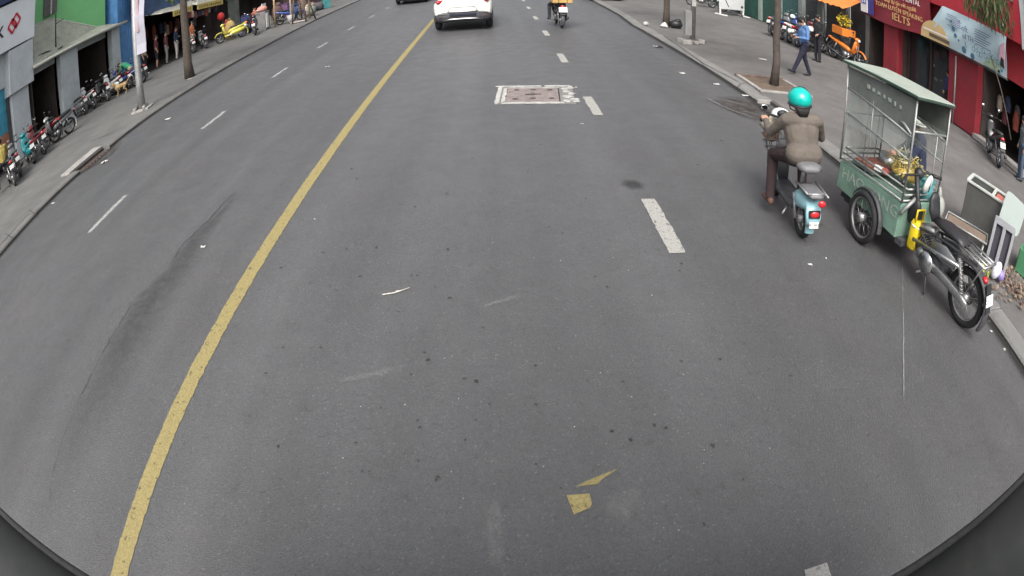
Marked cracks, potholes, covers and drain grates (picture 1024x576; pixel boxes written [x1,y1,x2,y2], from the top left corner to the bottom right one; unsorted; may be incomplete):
drain grate [61,146,108,177]
manhole cover [494,85,580,105]
